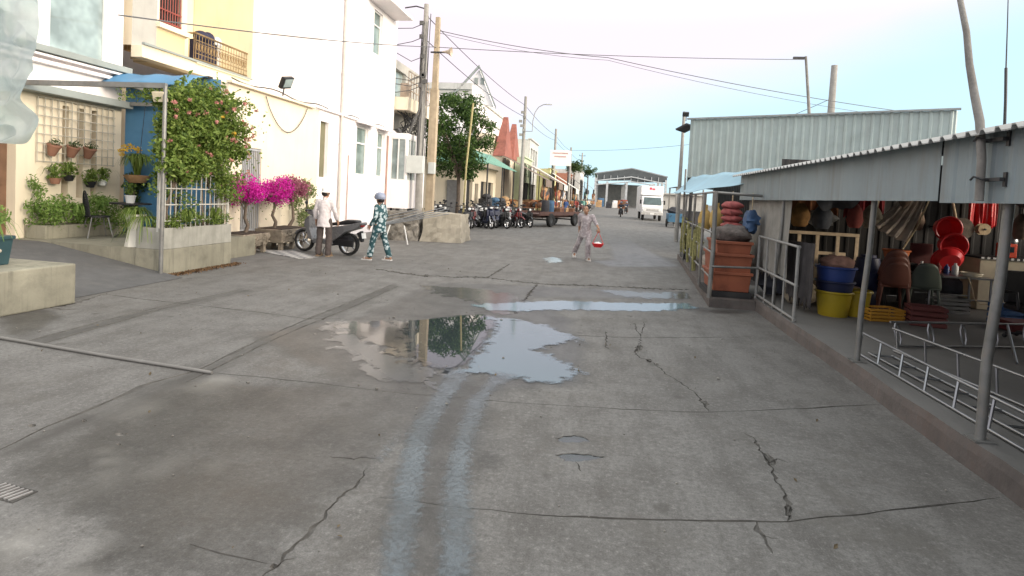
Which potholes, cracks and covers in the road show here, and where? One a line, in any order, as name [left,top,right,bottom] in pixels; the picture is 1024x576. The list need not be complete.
crack [634,323,709,412]
pothole [556,453,604,462]
drain grate [0,482,38,503]
pothole [556,435,591,443]
crack [262,457,376,576]
crack [742,432,793,554]
